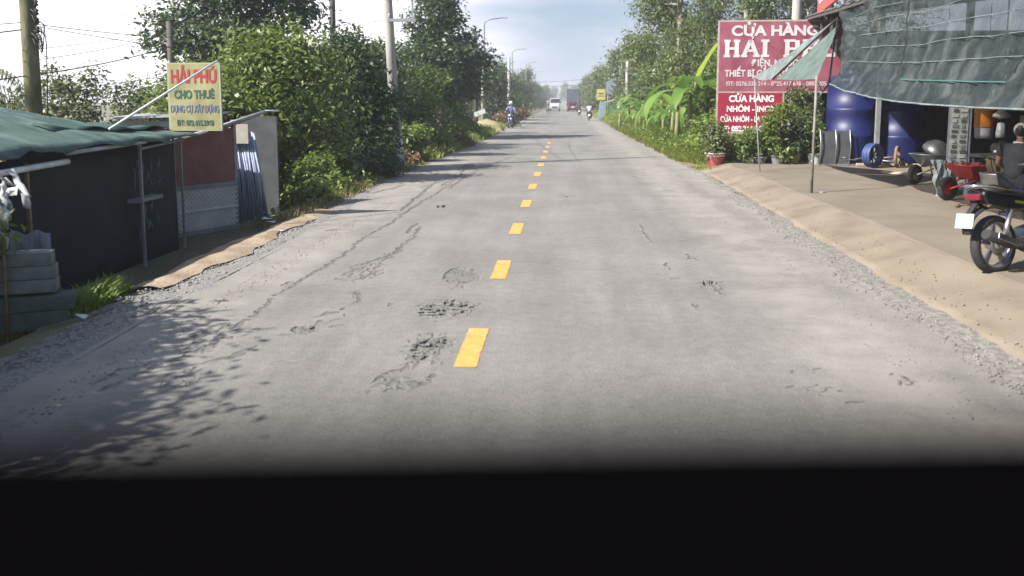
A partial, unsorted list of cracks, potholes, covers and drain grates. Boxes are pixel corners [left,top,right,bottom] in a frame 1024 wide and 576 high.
crack [93,157,512,411]
crack [638,209,725,309]
pothole [416,299,475,317]
pothole [441,266,486,285]
pothole [410,337,456,364]
